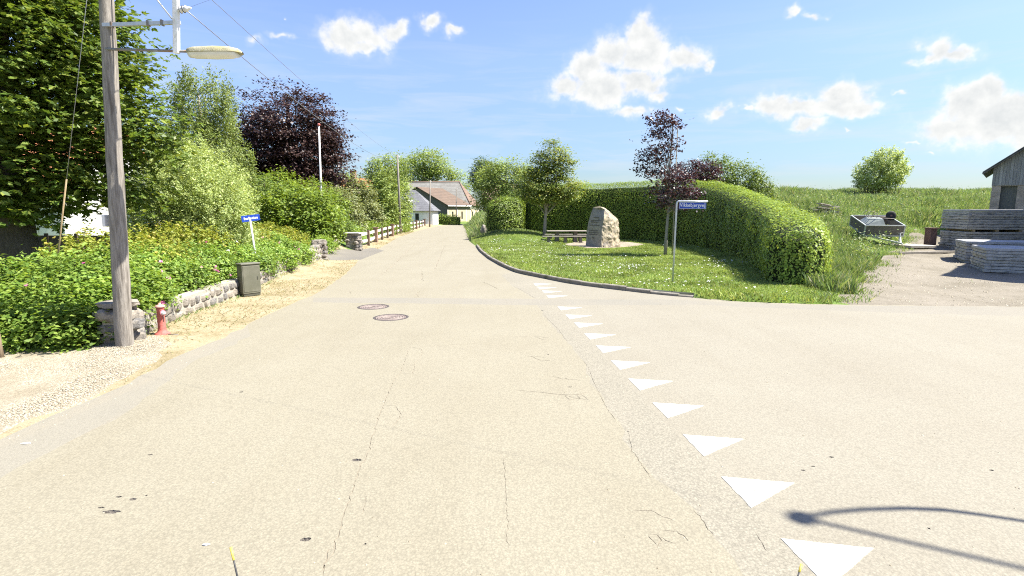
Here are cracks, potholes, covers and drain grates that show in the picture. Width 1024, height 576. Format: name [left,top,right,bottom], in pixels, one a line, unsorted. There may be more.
crack [320,344,459,575]
crack [521,378,587,400]
crack [634,510,687,548]
